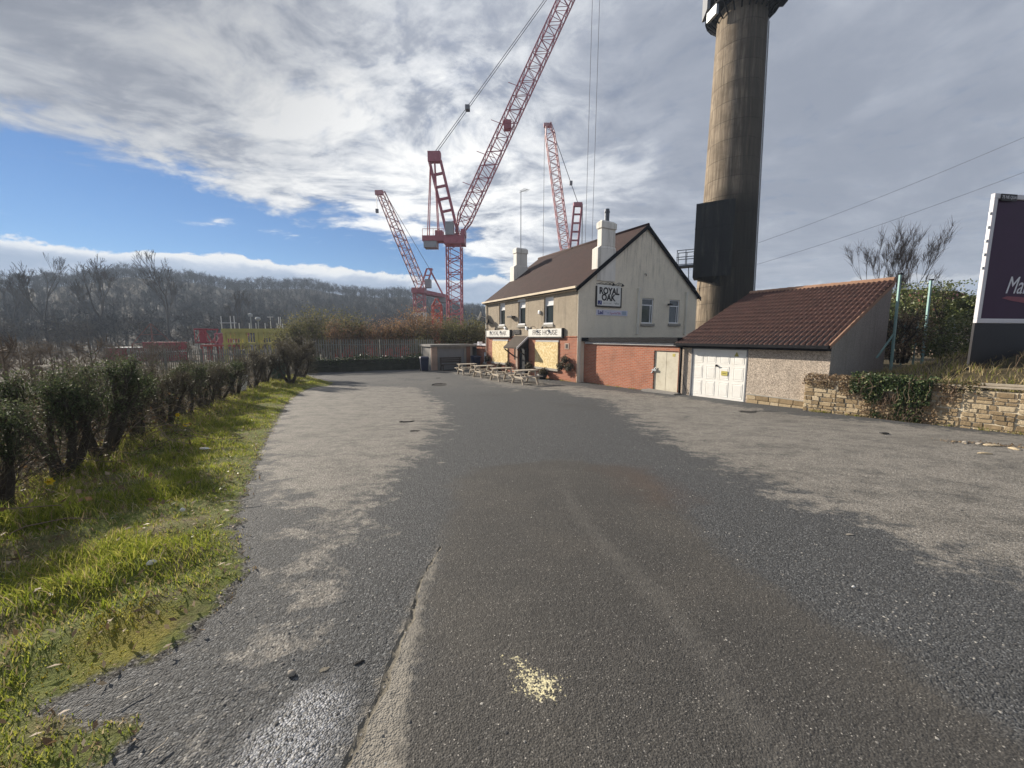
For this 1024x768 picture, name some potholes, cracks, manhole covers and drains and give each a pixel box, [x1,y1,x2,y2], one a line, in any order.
crack [341,546,441,768]
